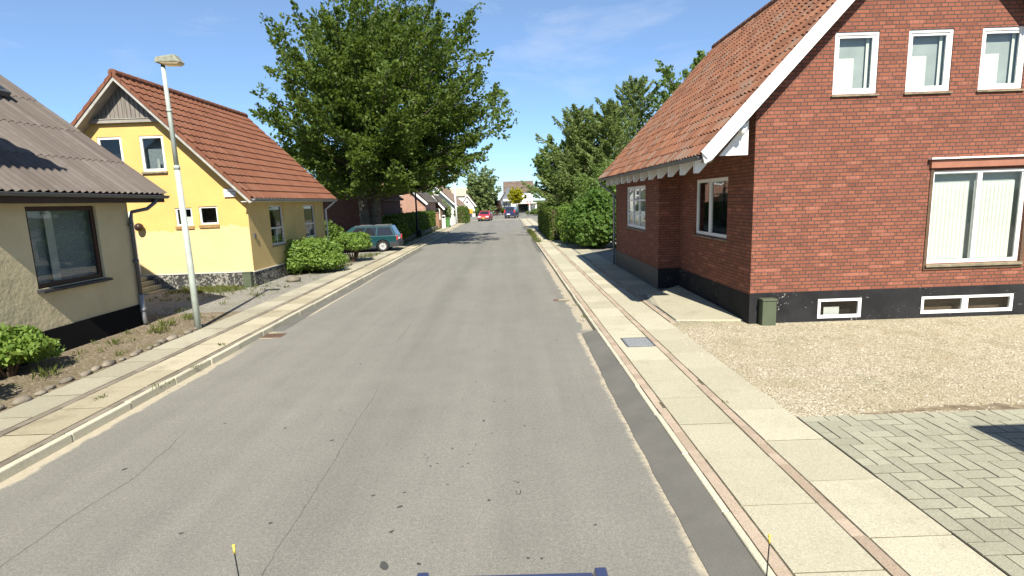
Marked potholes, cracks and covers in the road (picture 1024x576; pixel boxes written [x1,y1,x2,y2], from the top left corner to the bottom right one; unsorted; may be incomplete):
manhole cover [620,337,656,347]
